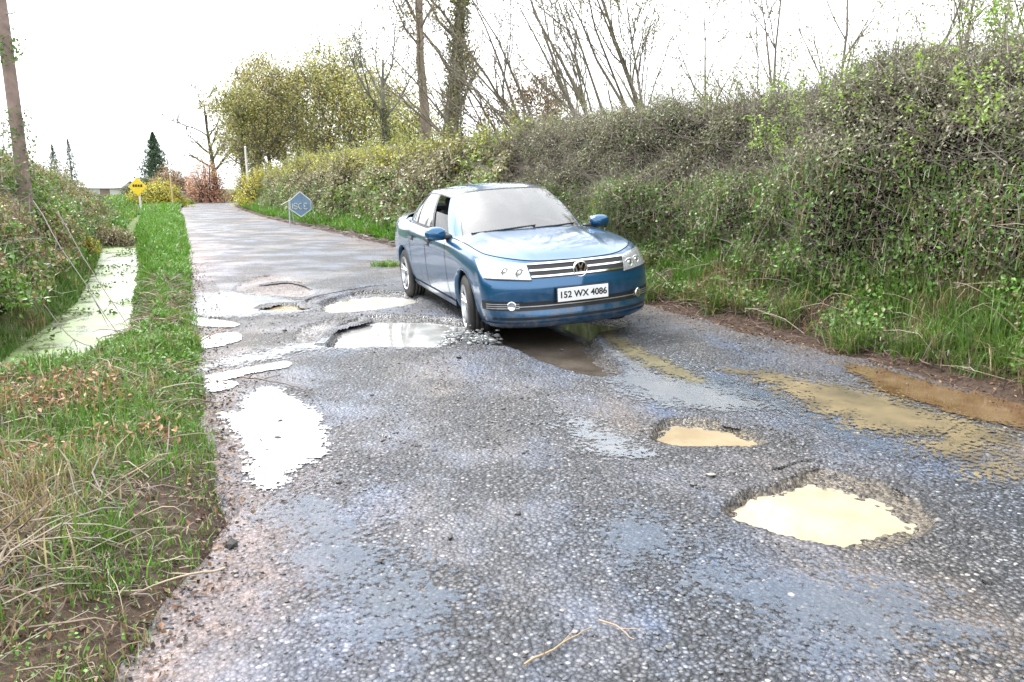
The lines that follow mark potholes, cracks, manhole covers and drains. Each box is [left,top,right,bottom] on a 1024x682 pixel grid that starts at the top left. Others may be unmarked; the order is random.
pothole [707,461,959,558]
pothole [640,413,781,452]
pothole [314,313,492,350]
pothole [253,302,324,312]
pothole [228,274,321,298]
pothole [310,289,426,314]
pothole [184,290,281,320]
pothole [470,316,637,379]
